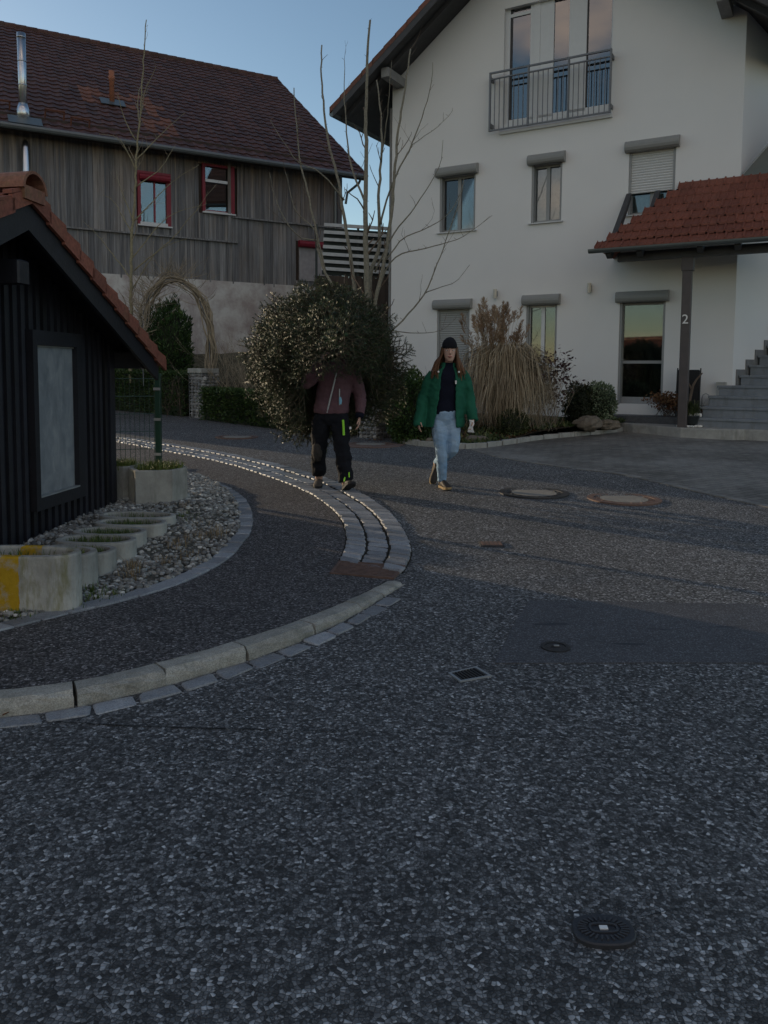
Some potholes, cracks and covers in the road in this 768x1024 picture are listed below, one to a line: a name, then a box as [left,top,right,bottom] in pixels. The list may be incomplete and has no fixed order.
manhole cover [587,494,662,506]
manhole cover [499,488,570,500]
drain grate [448,666,492,683]
utility cover [540,641,571,653]
